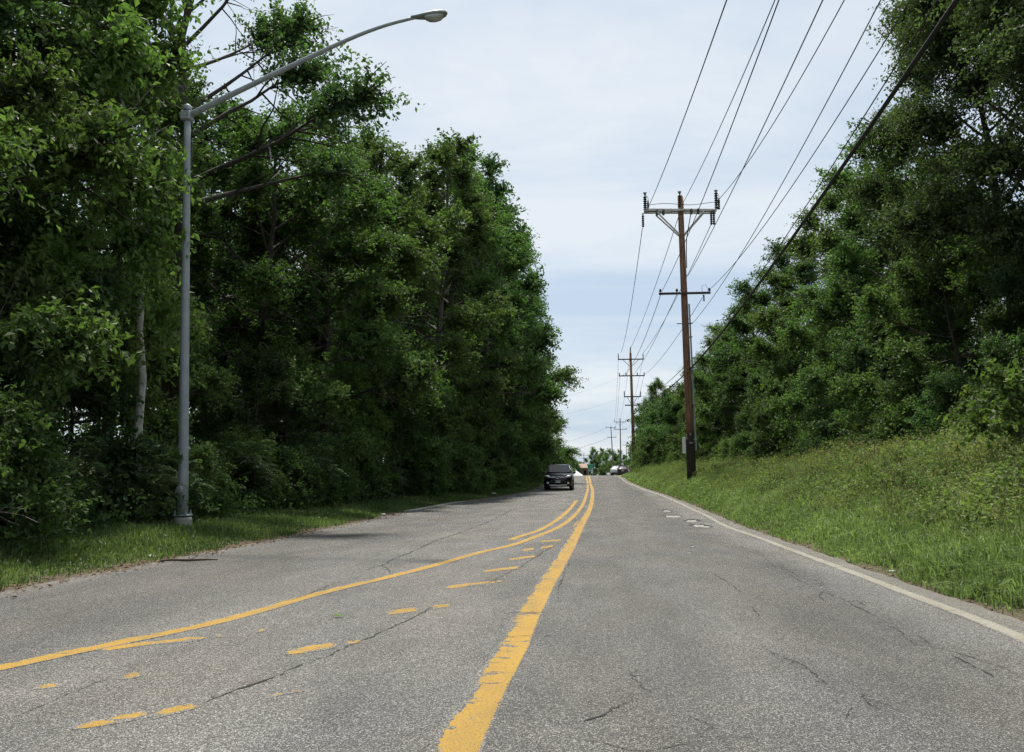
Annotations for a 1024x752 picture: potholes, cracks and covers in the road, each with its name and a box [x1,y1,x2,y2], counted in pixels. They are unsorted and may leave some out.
crack [746,551,1024,679]
crack [749,639,917,718]
crack [572,674,652,721]
crack [292,509,512,600]
